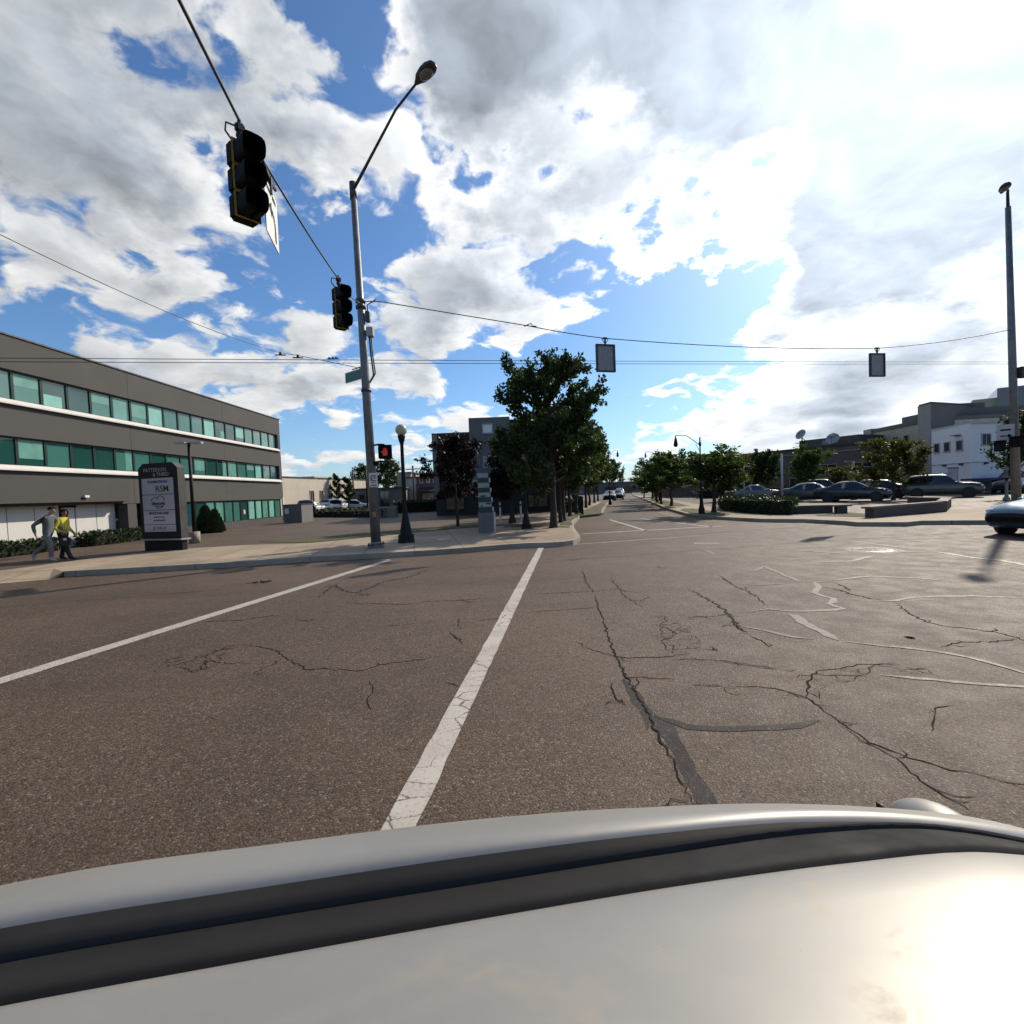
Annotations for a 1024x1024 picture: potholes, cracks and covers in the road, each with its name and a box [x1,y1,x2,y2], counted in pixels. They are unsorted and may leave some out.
crack [539,558,1024,817]
crack [154,644,445,710]
